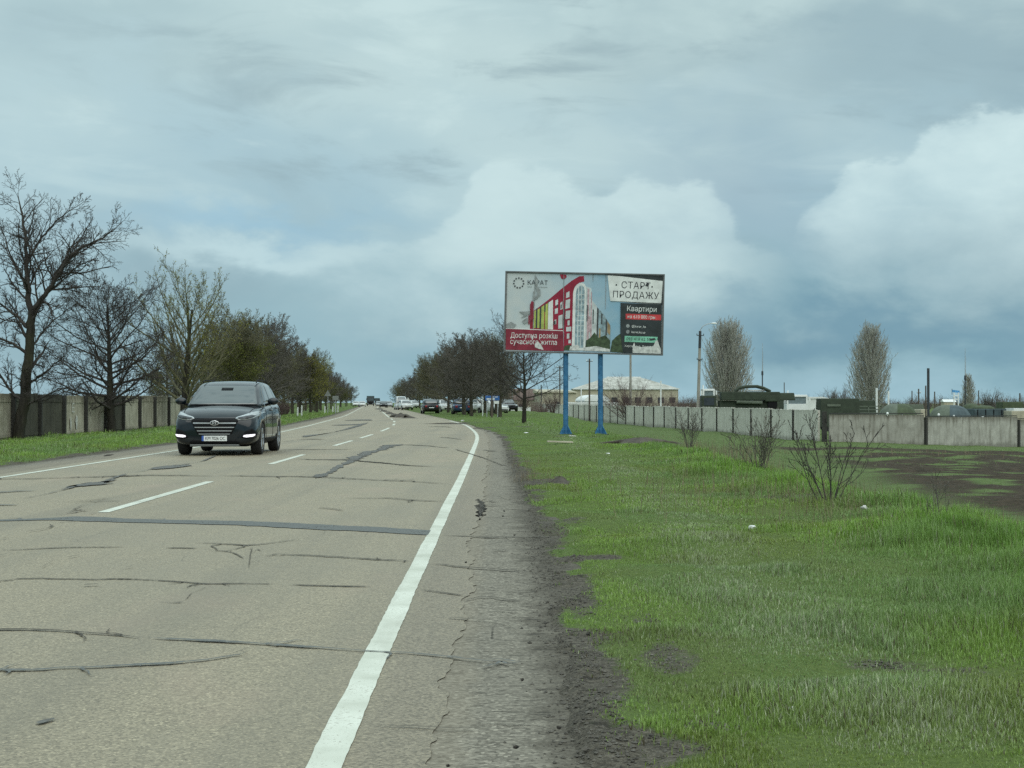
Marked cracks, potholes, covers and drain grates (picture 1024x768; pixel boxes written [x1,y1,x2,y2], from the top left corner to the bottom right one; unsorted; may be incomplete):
crack [423,589,516,630]
crack [433,563,523,572]
crack [166,539,410,564]
pothole [474,499,487,520]
crack [0,458,433,531]
crack [0,537,270,602]
crack [0,628,519,675]
